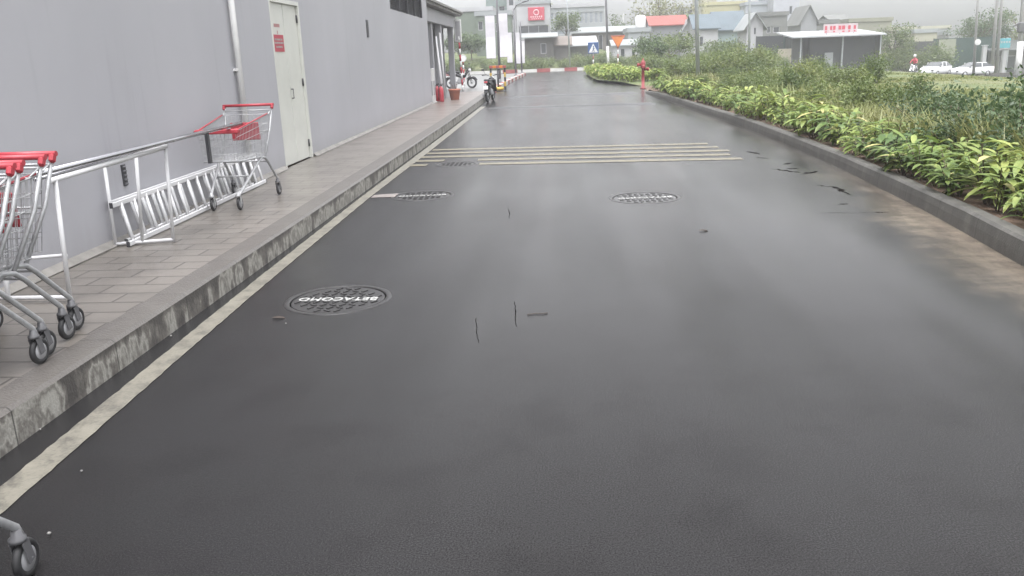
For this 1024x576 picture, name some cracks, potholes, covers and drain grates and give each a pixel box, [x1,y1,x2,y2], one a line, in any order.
crack [746,151,850,205]
manhole cover [284,285,392,315]
manhole cover [391,190,454,201]
manhole cover [609,192,681,204]
